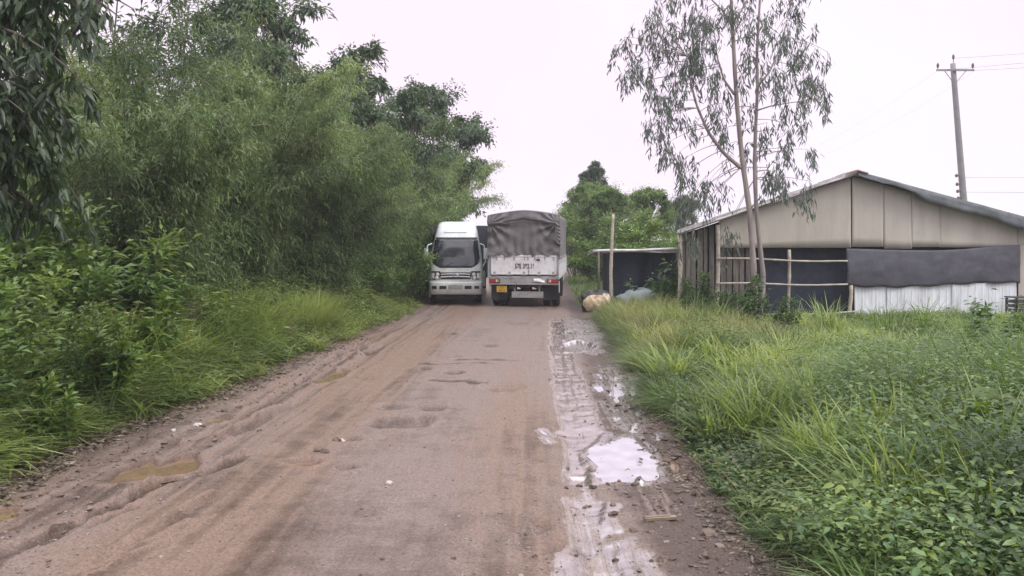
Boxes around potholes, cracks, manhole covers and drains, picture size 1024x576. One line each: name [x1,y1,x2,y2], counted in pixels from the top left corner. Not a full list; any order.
pothole [98,451,210,484]
pothole [559,339,598,352]
pothole [357,412,445,429]
